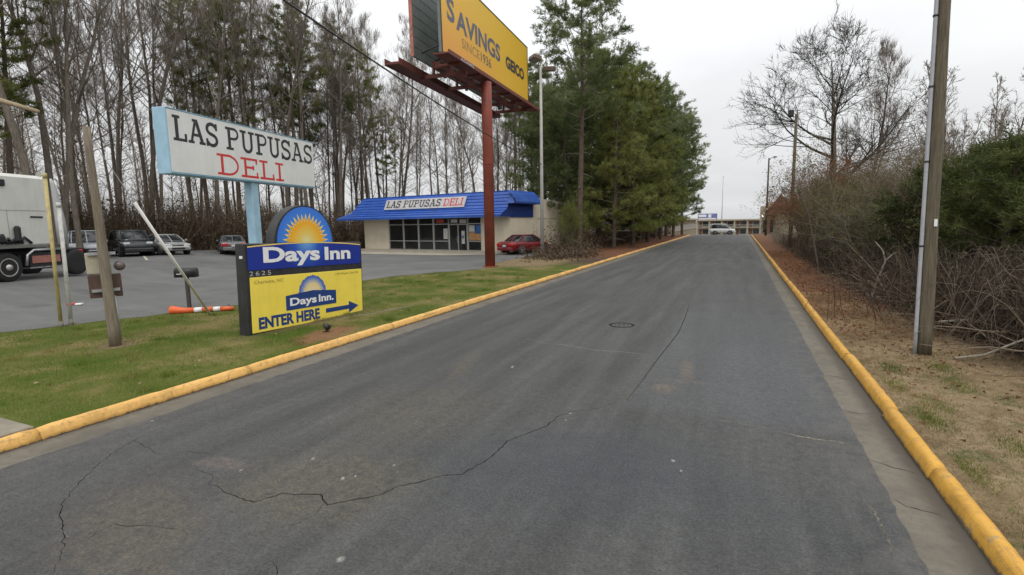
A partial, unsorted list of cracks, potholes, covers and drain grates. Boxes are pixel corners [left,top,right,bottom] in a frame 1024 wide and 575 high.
crack [53,430,155,574]
crack [714,418,853,445]
crack [199,403,613,536]
